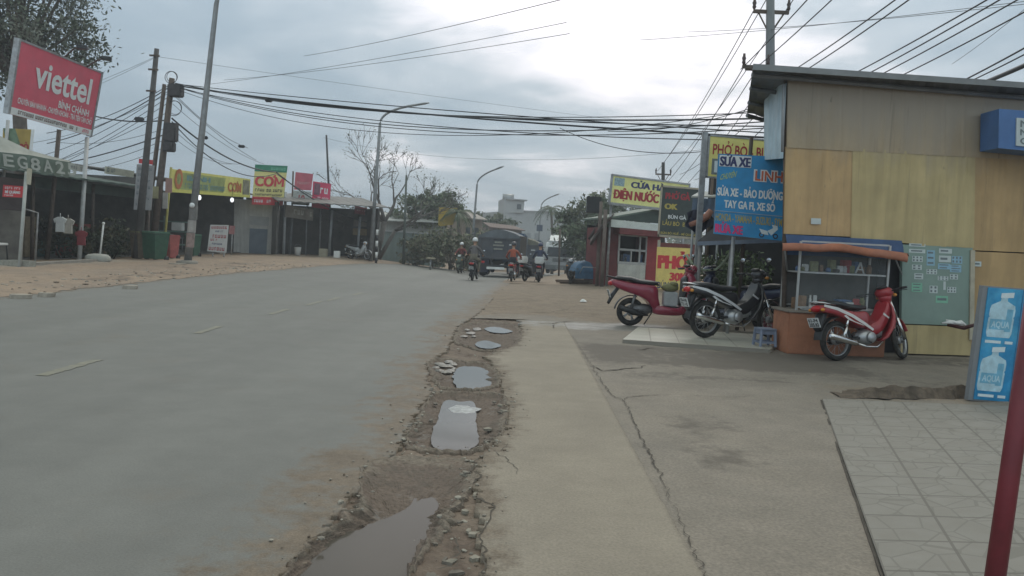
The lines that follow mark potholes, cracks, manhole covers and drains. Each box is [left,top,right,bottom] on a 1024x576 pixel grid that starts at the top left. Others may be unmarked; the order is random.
pothole [426,358,504,392]
pothole [402,390,509,456]
pothole [282,454,479,576]
pothole [452,321,523,353]
